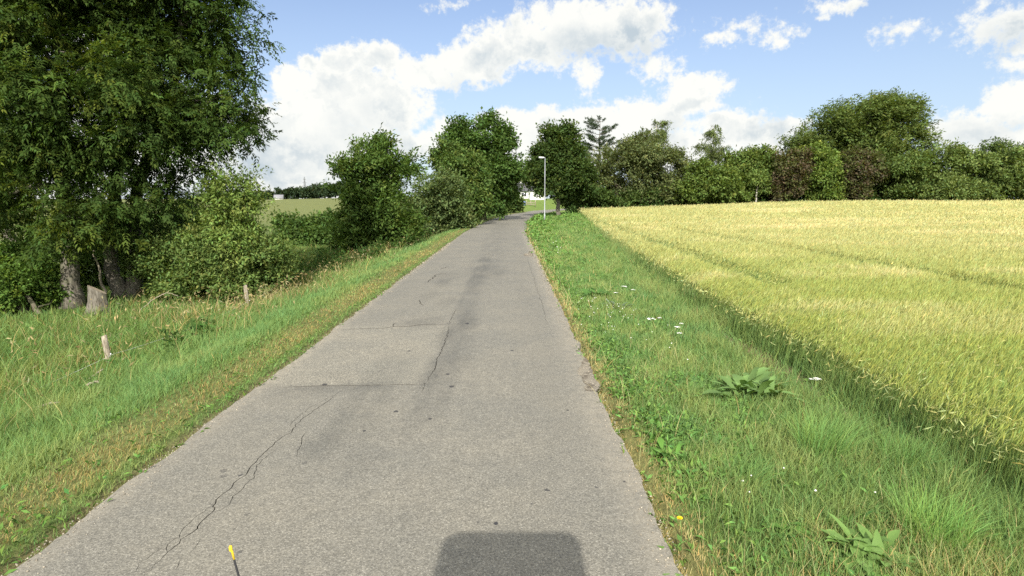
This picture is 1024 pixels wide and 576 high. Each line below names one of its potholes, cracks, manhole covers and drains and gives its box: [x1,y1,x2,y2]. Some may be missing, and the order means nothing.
crack [136,393,337,575]
